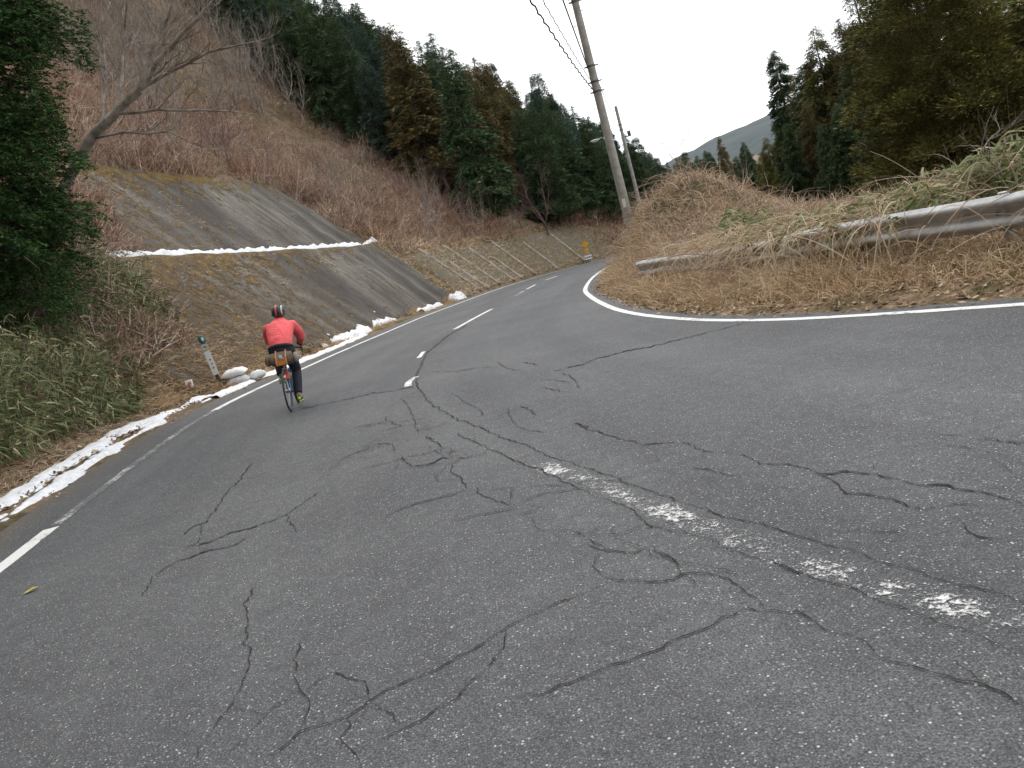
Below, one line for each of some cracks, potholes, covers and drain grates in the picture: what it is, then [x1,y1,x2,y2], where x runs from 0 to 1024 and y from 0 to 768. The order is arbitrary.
crack [141,463,315,596]
crack [432,323,743,392]
crack [329,392,1024,707]
crack [192,582,605,768]
